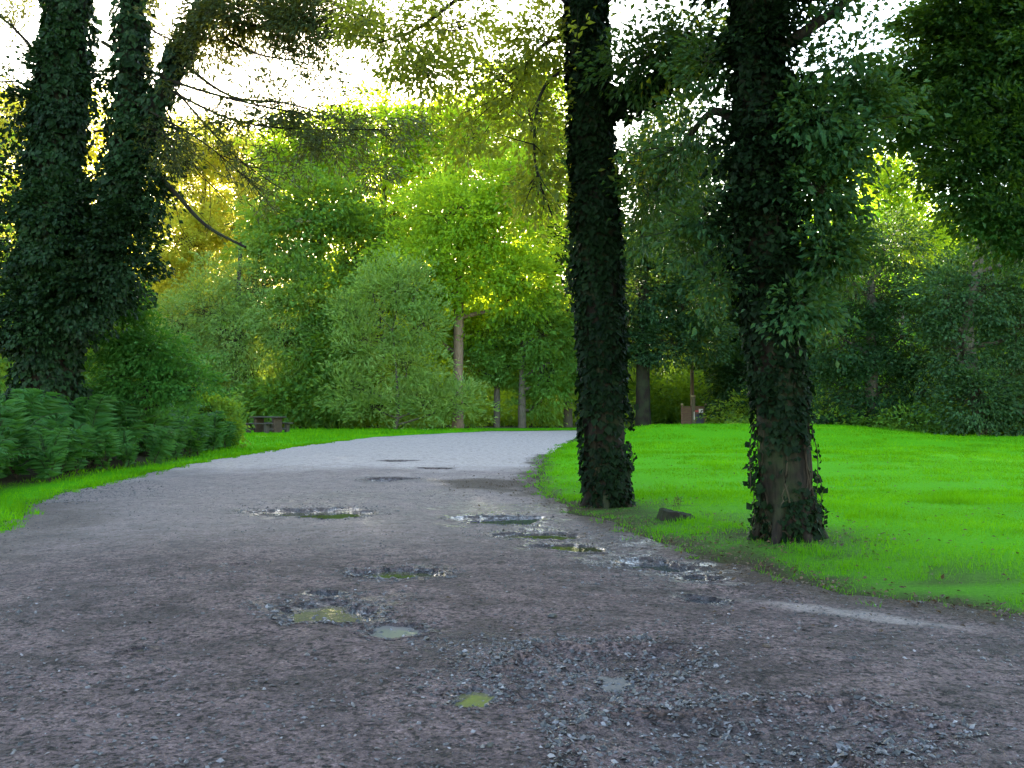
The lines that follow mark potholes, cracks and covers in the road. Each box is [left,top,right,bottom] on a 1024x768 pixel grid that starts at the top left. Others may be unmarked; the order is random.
pothole [438,513,554,526]
pothole [441,681,511,711]
pothole [518,543,614,554]
pothole [673,592,739,605]
pothole [227,505,391,520]
pothole [354,619,439,641]
pothole [335,564,463,580]
pothole [669,573,732,583]
pothole [298,588,357,598]
pothole [485,530,592,542]
pothole [265,595,394,627]
